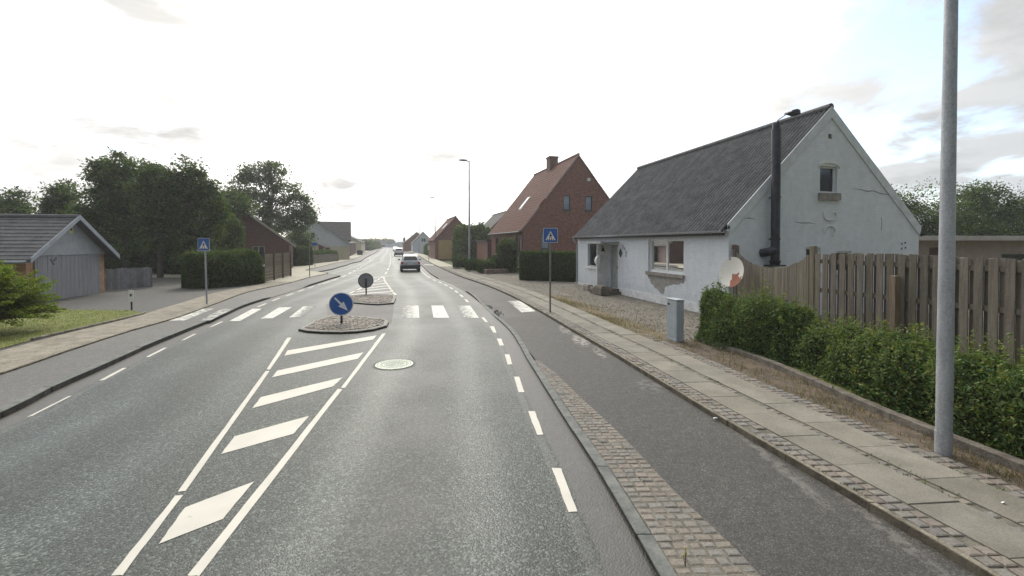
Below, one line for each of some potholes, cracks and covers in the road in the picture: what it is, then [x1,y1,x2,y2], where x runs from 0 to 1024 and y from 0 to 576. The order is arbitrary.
manhole cover [372,359,416,370]
